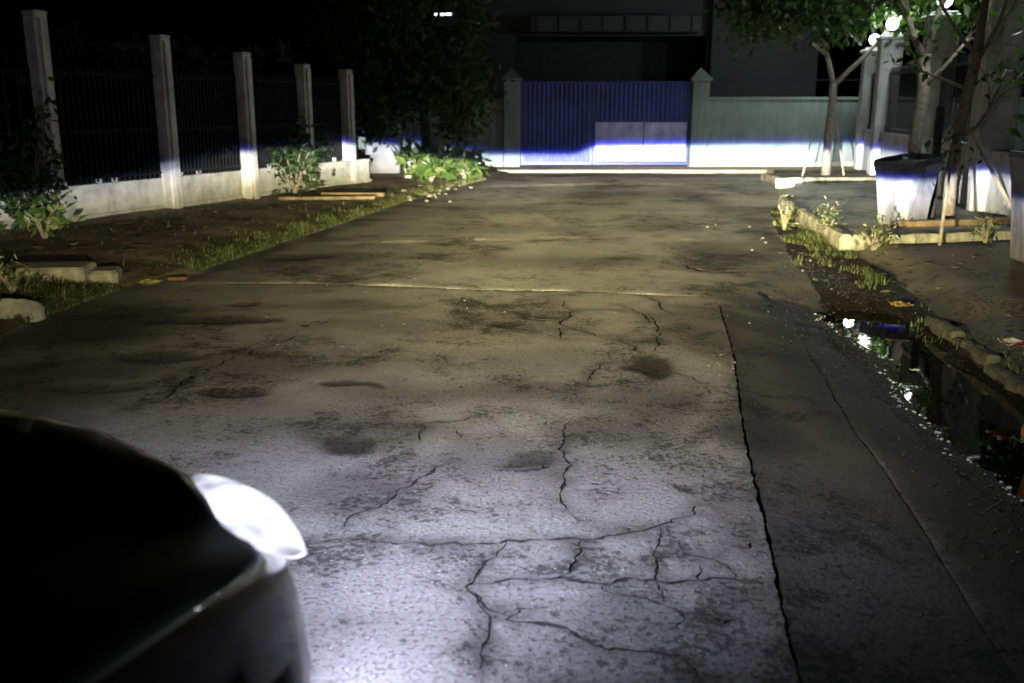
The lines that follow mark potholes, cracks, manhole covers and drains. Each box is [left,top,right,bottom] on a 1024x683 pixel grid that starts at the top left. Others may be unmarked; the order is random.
crack [303,418,771,680]
crack [516,295,683,353]
crack [122,336,309,410]
